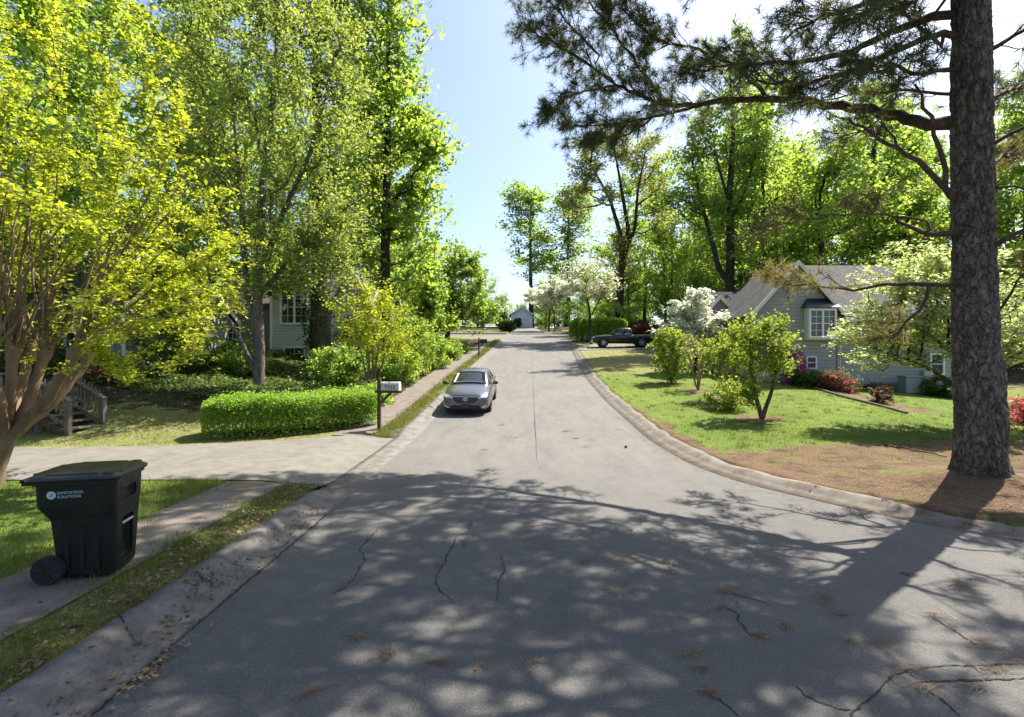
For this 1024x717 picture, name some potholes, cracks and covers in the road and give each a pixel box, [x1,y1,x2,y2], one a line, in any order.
crack [729,593,769,635]
crack [330,528,378,594]
crack [435,517,473,598]
crack [796,663,1024,717]
